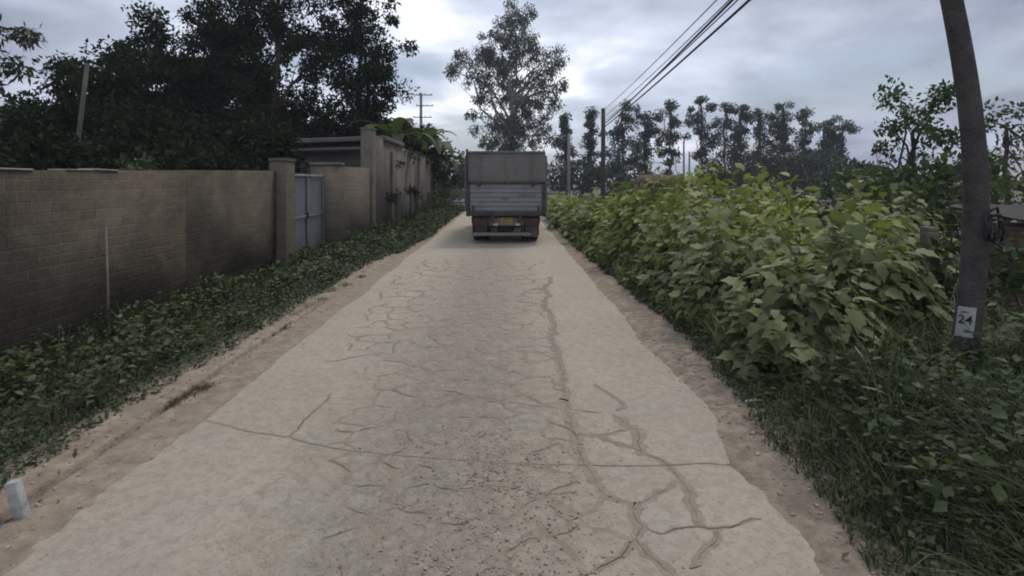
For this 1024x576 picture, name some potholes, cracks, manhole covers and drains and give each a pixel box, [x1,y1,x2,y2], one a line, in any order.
crack [210,260,762,576]
